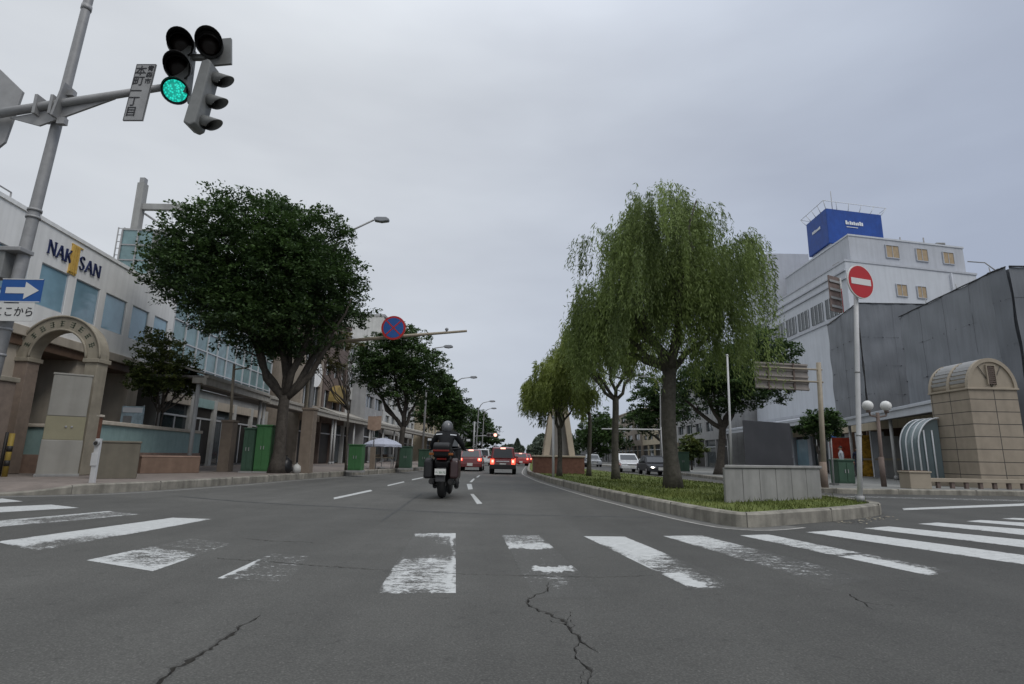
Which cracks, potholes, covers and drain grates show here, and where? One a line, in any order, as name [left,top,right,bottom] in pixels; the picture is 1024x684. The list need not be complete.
crack [150,616,259,684]
crack [218,558,651,684]
